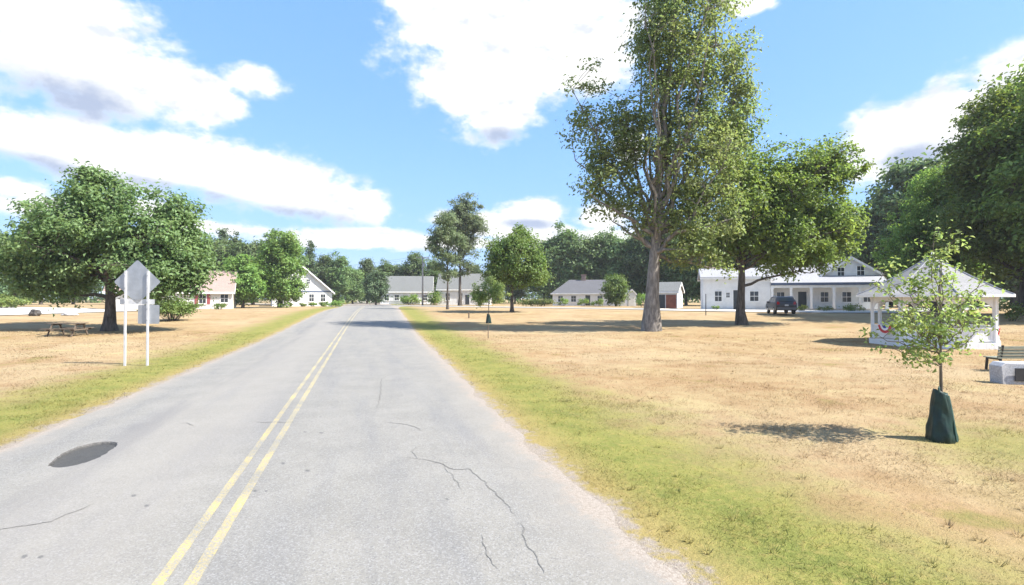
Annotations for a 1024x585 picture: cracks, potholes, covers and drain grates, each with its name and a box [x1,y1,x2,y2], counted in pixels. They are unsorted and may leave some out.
pothole [48,441,117,468]
crack [396,447,544,570]
